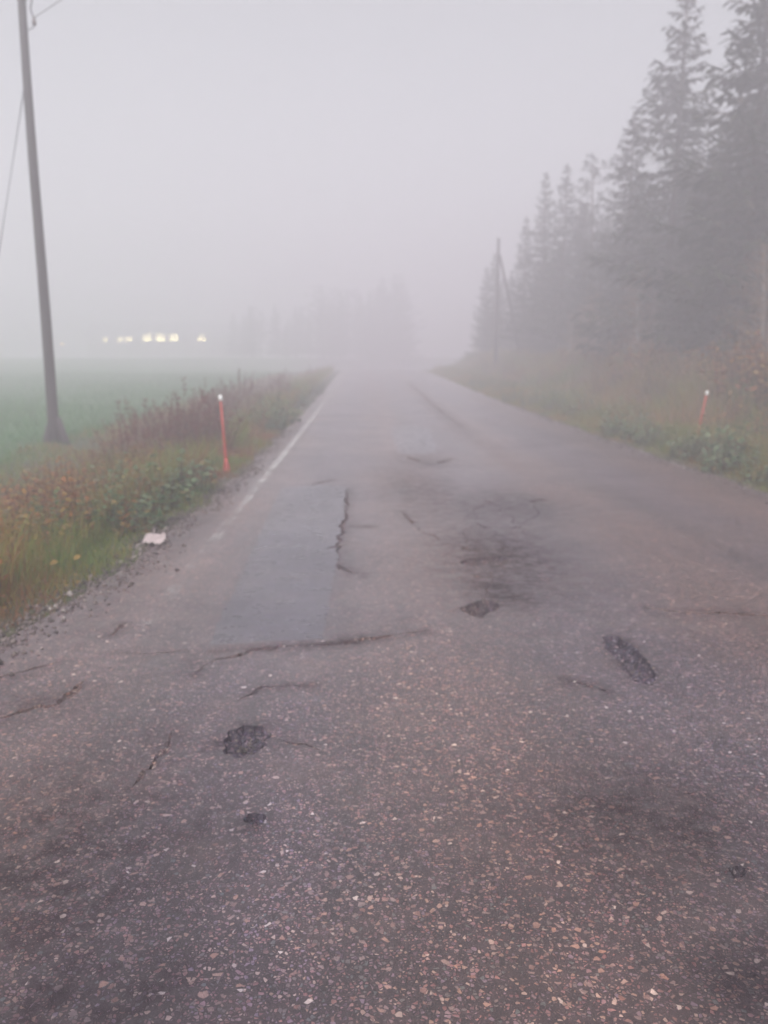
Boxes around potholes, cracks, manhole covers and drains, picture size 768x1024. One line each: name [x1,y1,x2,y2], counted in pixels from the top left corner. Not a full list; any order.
pothole [724,864,751,879]
crack [309,480,367,575]
pothole [243,813,267,826]
crack [0,662,86,718]
crack [238,684,312,700]
crack [416,499,568,596]
crack [132,729,173,788]
pothole [602,635,659,685]
crack [137,630,427,673]
pothole [460,598,500,619]
crack [645,607,766,616]
pothole [222,725,272,758]
